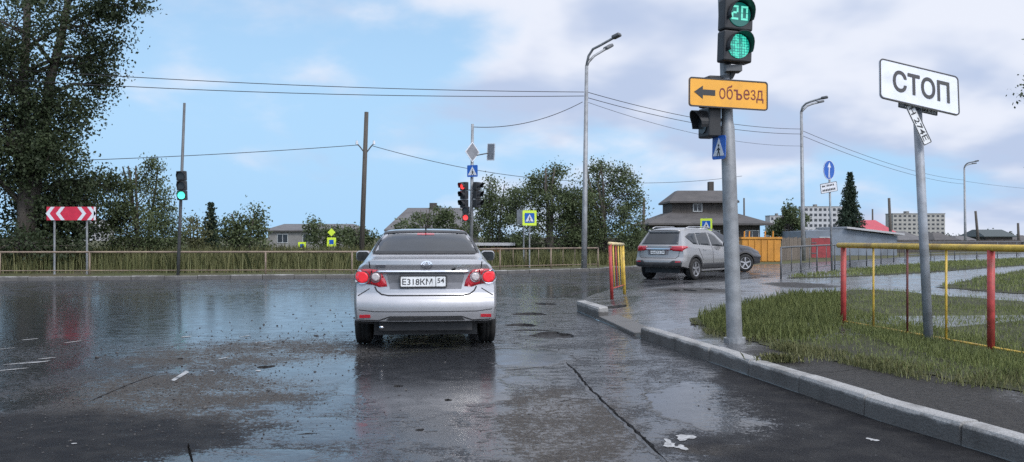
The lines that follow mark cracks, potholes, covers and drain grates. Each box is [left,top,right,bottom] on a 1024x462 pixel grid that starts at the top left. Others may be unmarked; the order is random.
crack [89,374,157,402]
